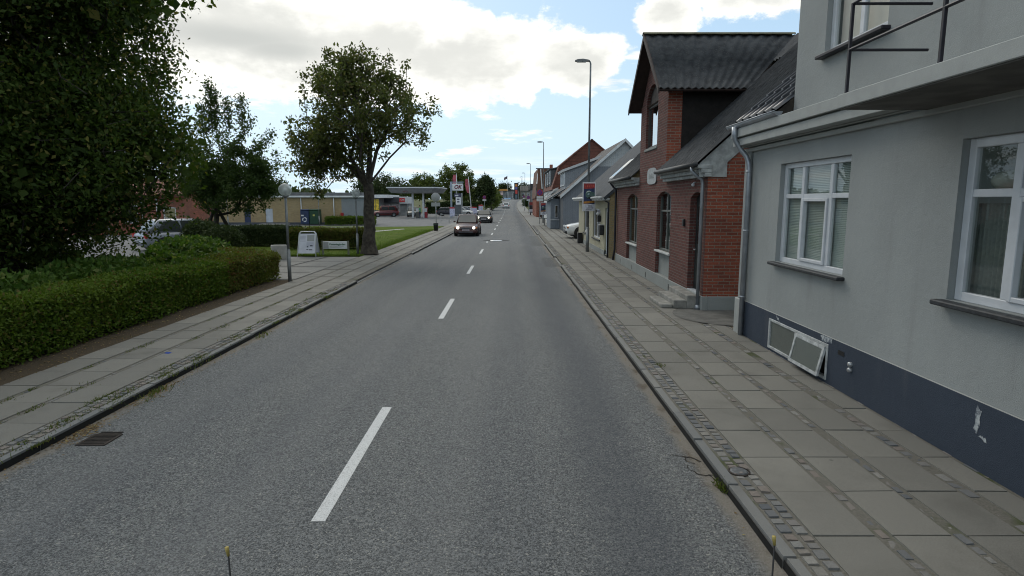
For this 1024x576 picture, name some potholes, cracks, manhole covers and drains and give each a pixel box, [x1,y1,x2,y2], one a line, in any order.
utility cover [728,466,751,477]
drain grate [75,432,123,446]
